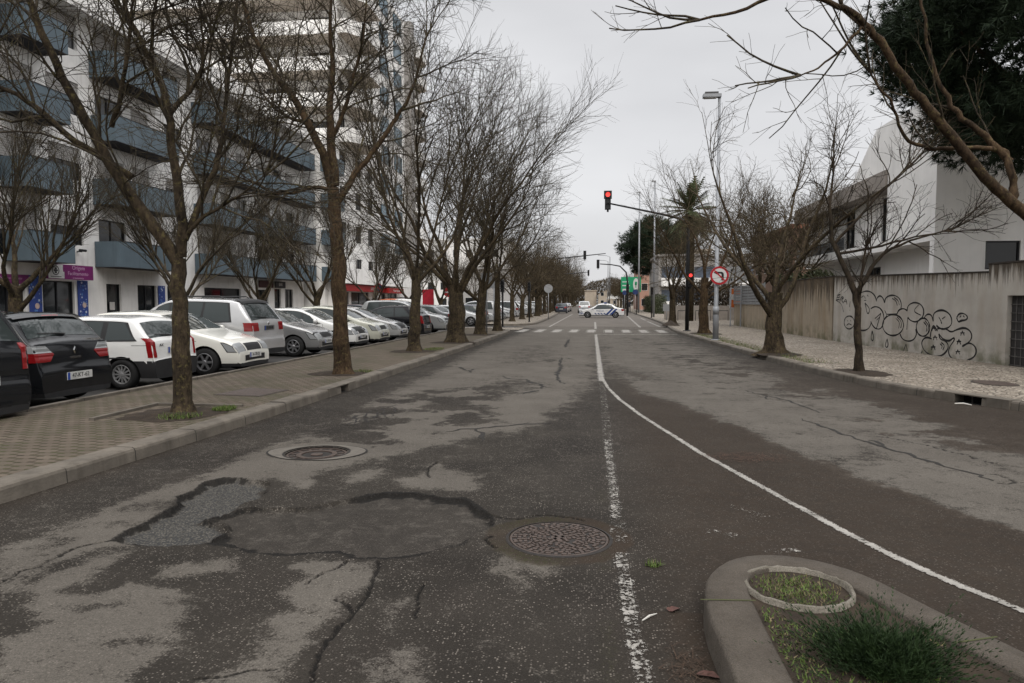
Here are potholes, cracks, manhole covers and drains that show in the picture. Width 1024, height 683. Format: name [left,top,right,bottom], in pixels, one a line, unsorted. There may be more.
manhole cover [266,444,368,461]
drain grate [935,390,1021,410]
crack [503,339,570,394]
crack [448,423,548,441]
crack [304,560,381,683]
pothole [204,493,495,558]
crack [411,584,426,619]
pothole [113,477,271,547]
crack [746,390,1024,485]
manhole cover [506,521,613,558]
